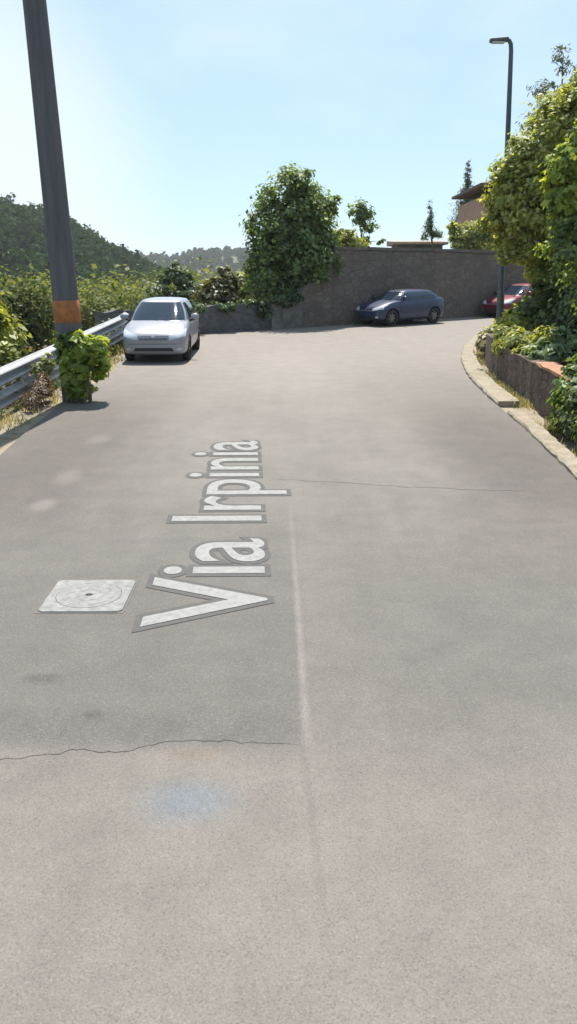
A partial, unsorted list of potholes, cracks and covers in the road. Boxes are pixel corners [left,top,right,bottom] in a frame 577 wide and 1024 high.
crack [271,479,528,491]
manhole cover [34,580,139,614]
